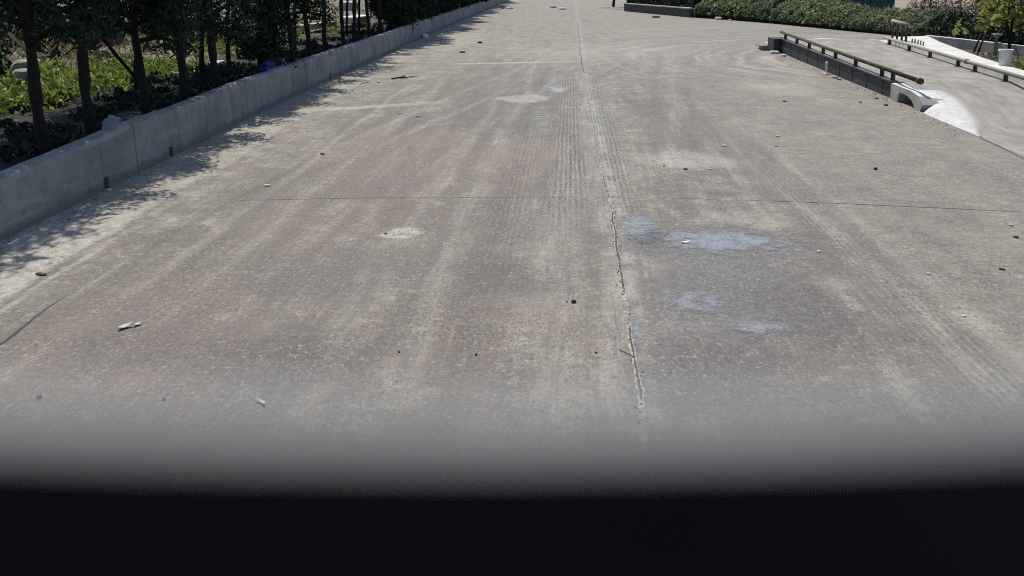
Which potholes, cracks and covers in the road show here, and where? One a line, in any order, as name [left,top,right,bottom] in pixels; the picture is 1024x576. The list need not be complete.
crack [0,296,65,345]
crack [577,22,646,404]
